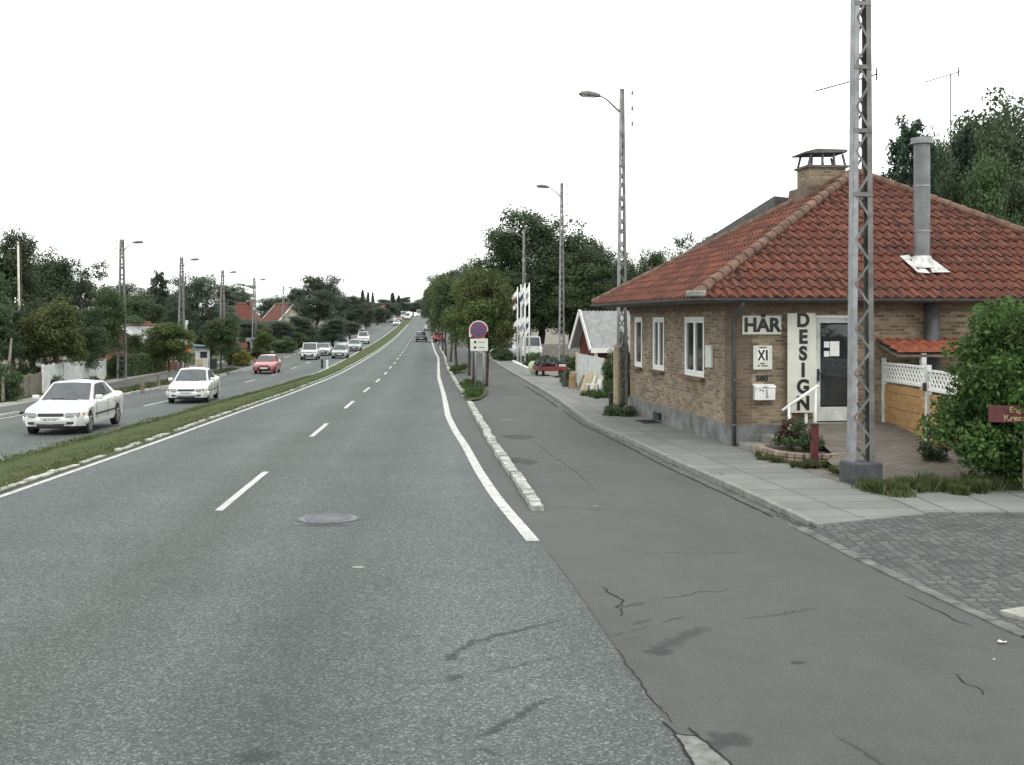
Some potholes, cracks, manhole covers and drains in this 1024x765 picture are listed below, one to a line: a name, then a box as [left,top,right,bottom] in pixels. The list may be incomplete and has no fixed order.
manhole cover [295,513,361,524]
crack [460,622,549,650]
crack [603,587,733,765]
crack [491,702,542,731]
